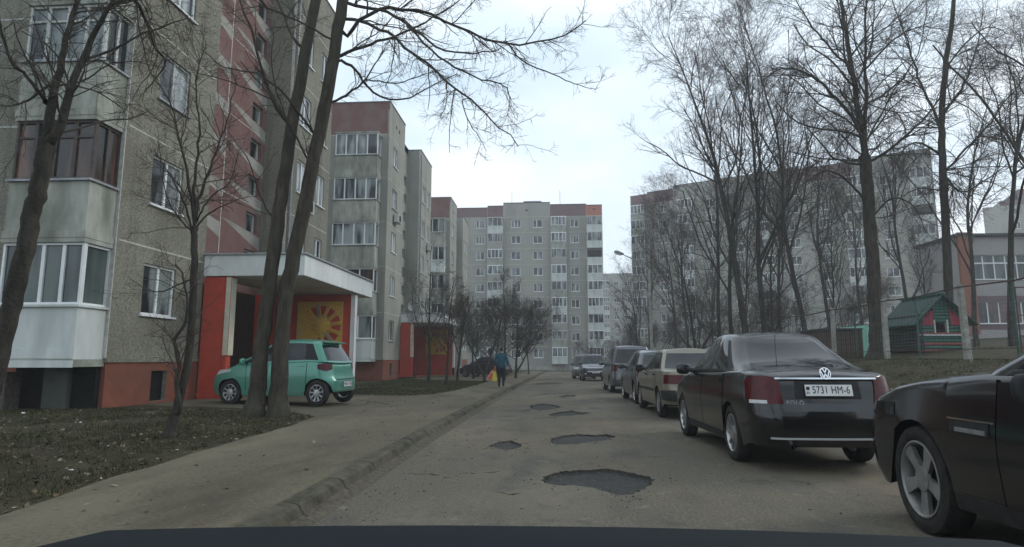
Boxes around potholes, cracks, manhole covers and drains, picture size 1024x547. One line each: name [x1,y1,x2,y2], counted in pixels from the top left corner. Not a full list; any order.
pothole [550,434,617,444]
pothole [541,469,654,495]
pothole [490,441,521,450]
